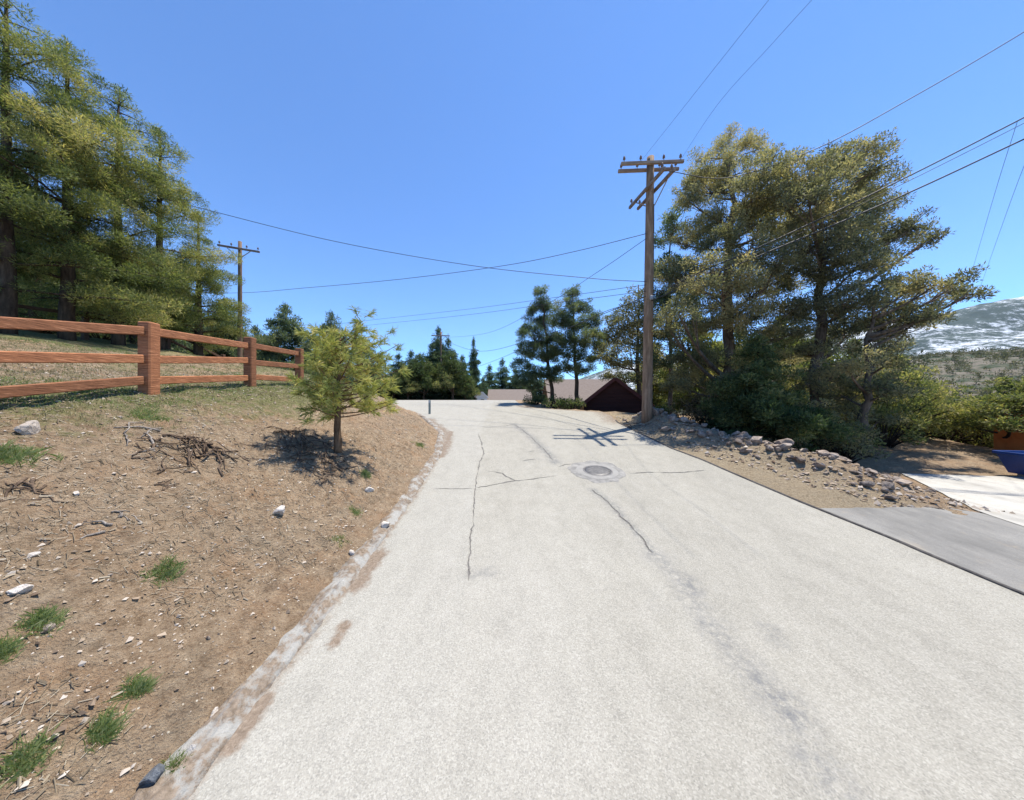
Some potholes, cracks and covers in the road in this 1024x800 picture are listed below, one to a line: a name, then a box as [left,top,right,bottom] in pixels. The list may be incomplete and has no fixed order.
manhole cover [567,461,626,483]
crack [438,434,568,581]
